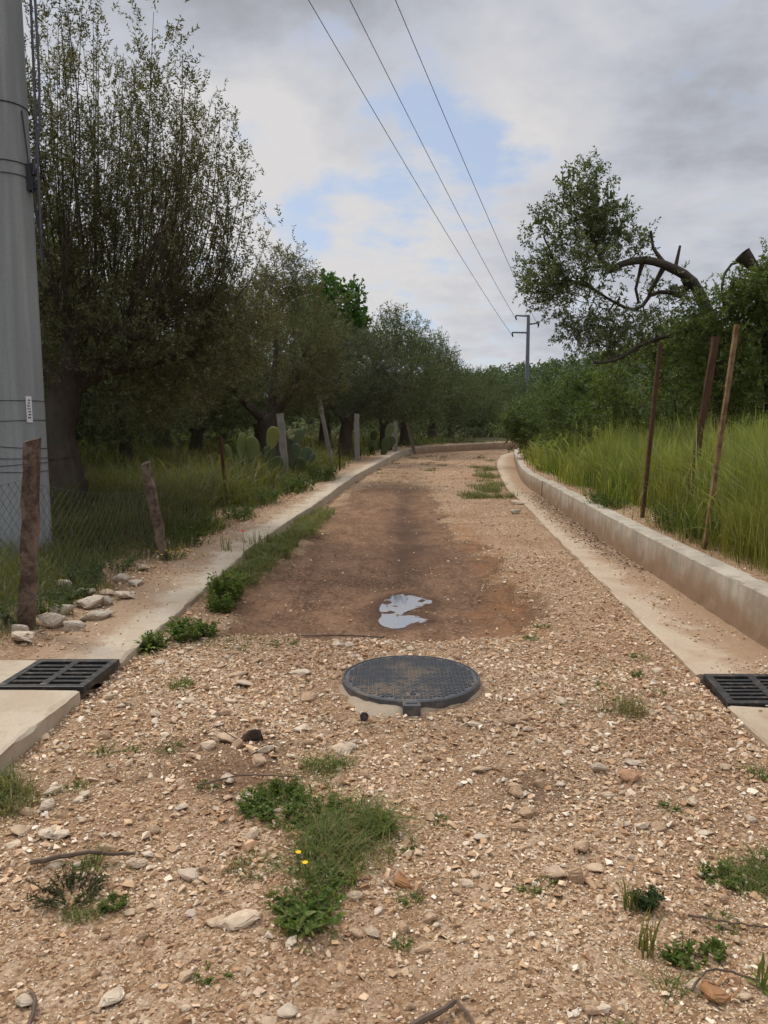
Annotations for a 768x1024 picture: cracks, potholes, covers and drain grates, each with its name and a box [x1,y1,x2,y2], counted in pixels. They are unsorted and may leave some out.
drain grate [703,674,768,708]
drain grate [0,659,120,693]
manhole cover [339,655,481,718]
